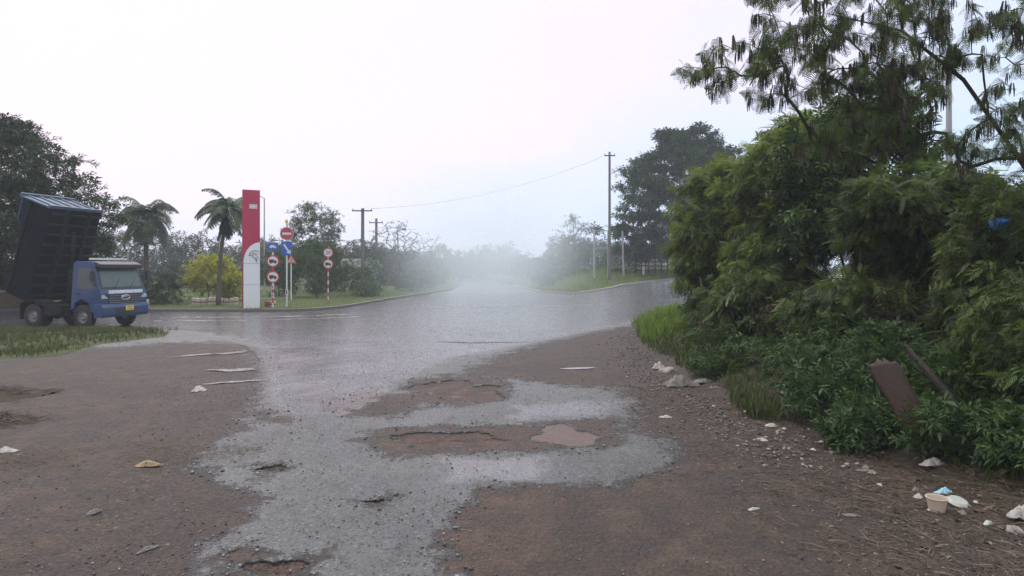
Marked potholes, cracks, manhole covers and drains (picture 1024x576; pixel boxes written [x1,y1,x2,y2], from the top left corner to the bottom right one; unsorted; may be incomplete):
pothole [230,555,317,576]
pothole [526,422,604,448]
pothole [248,462,295,472]
pothole [355,496,394,505]
pothole [404,378,509,403]
pothole [382,430,513,450]
